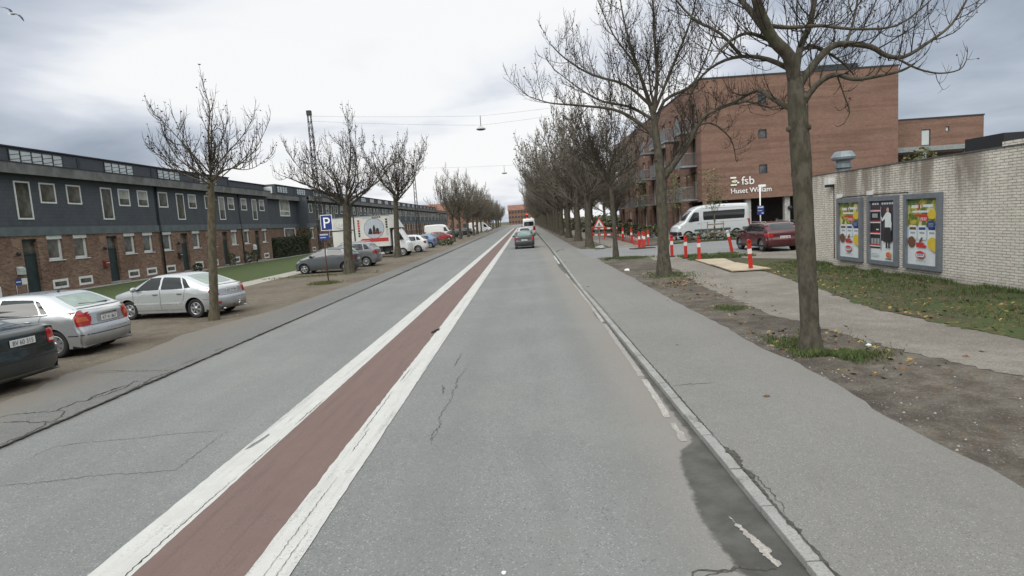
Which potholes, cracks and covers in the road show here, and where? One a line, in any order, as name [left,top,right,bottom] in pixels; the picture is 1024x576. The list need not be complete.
crack [2,360,192,444]
crack [431,355,468,444]
crack [1,430,228,486]
